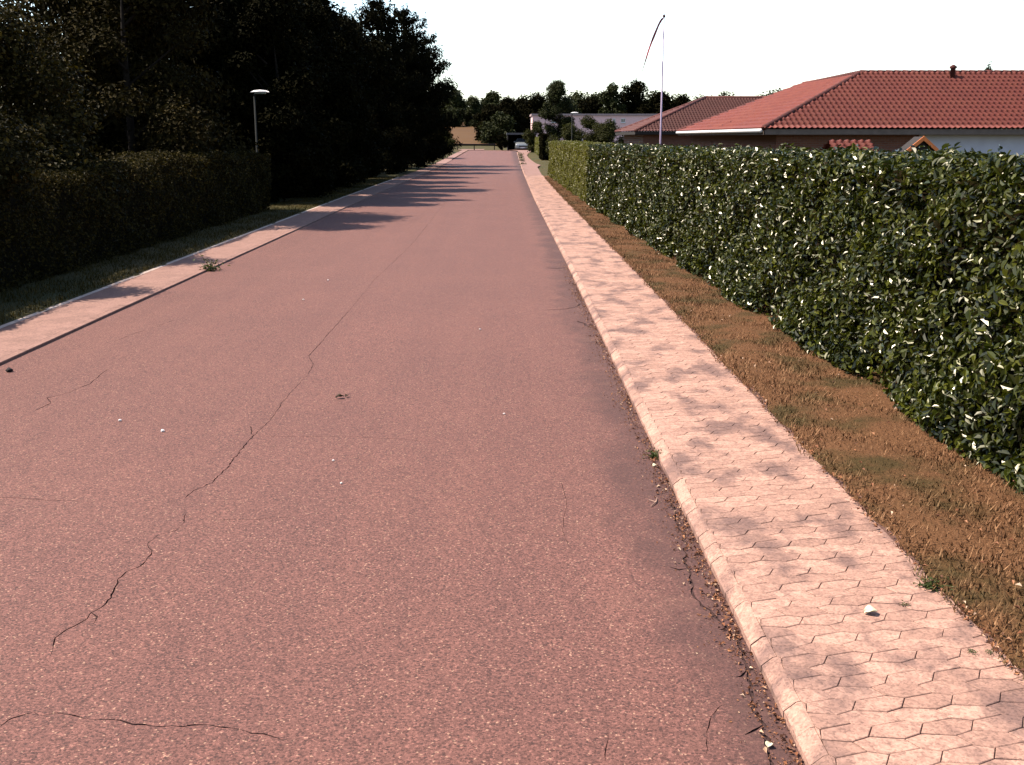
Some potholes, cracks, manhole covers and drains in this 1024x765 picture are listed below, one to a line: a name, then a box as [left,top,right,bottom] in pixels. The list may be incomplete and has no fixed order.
crack [0,712,283,740]
crack [50,189,458,656]
crack [670,501,774,765]
